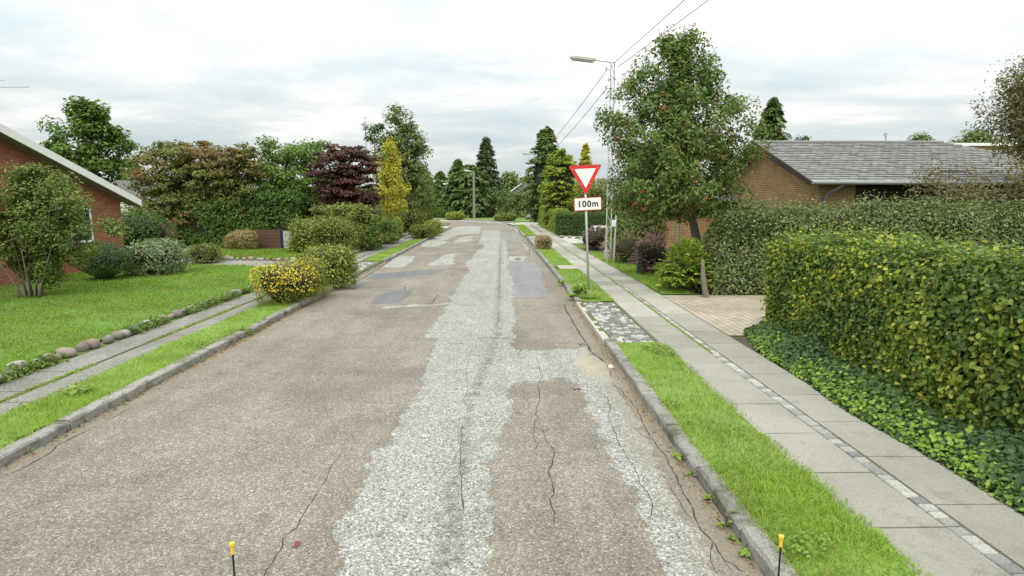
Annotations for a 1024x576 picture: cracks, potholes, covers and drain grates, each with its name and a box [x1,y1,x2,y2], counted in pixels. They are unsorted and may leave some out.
crack [264,457,339,576]
crack [481,305,745,576]
crack [2,407,131,477]
